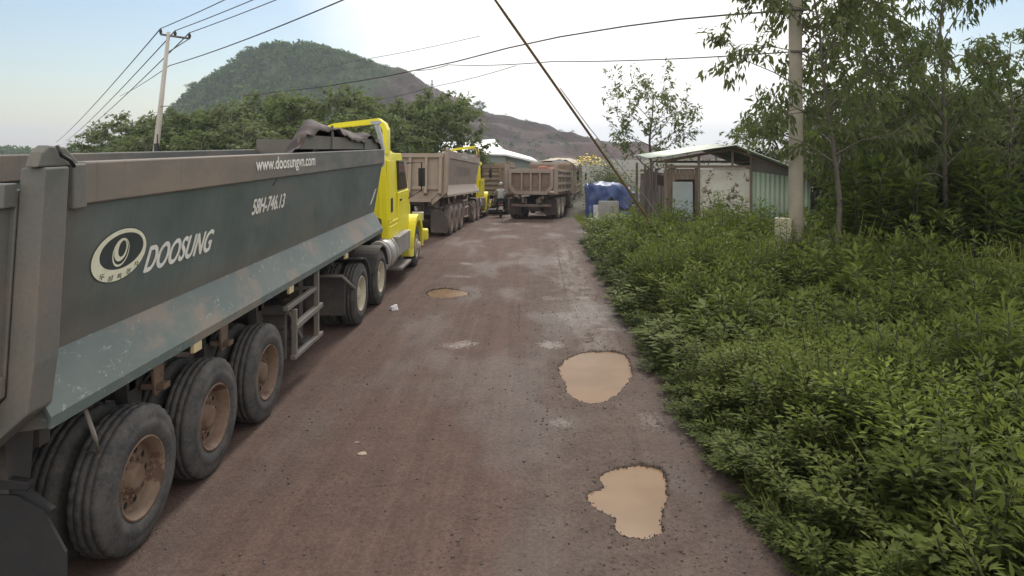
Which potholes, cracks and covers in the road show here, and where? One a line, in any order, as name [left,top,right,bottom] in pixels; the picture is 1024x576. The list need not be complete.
pothole [572,458,685,552]
pothole [546,347,643,408]
pothole [420,286,476,300]
